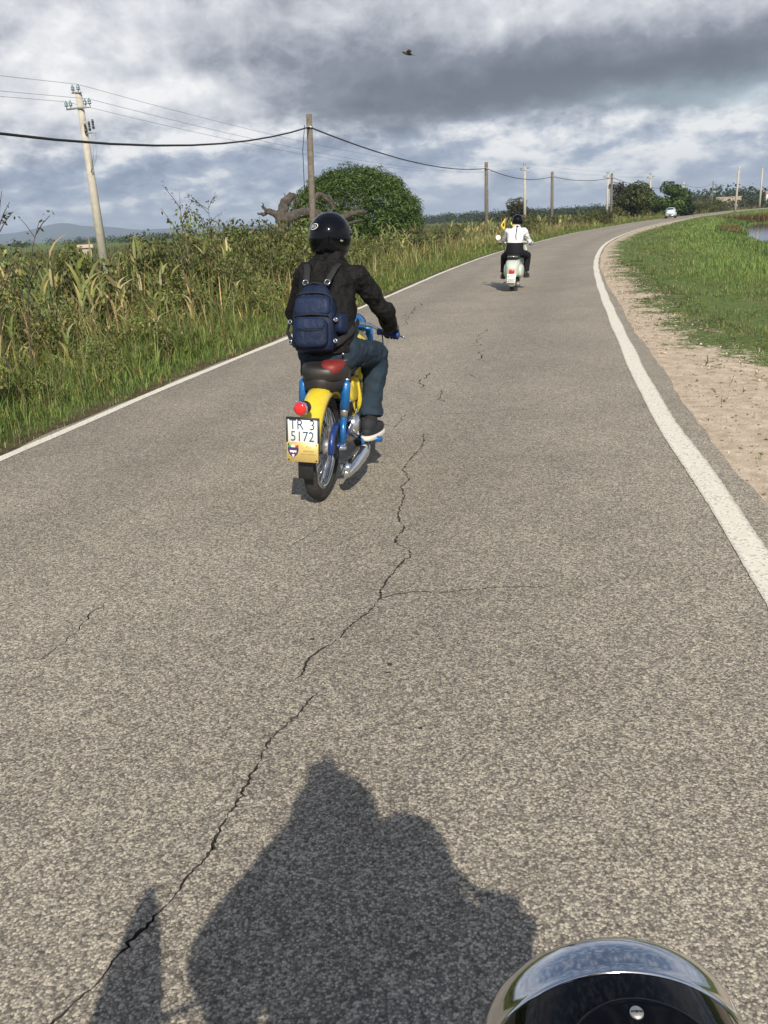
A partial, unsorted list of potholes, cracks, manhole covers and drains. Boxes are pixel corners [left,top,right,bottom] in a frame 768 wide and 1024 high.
crack [50,434,551,1024]
crack [39,599,110,660]
